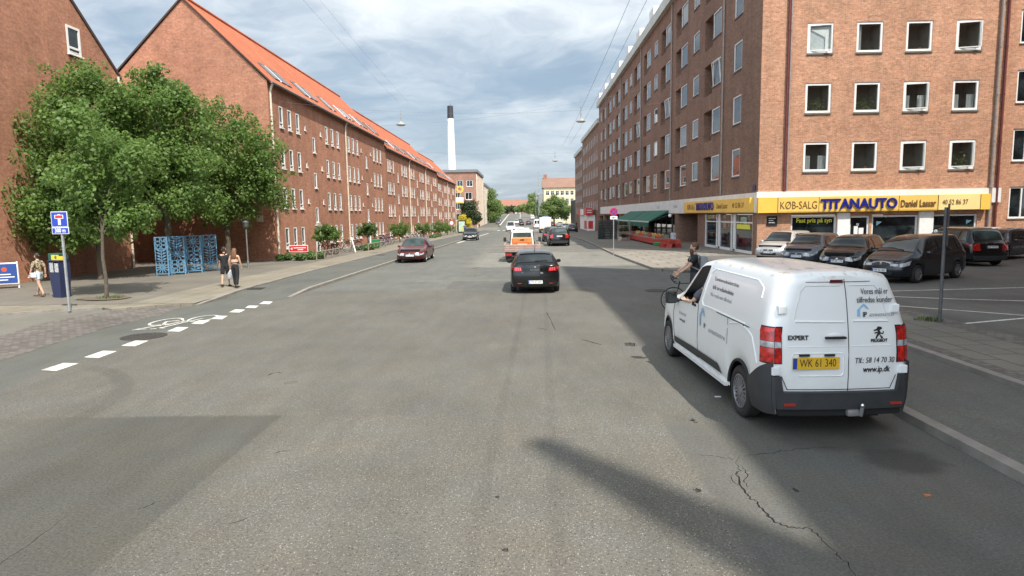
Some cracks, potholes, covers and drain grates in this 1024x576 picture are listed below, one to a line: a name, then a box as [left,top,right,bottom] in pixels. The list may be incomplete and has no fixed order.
crack [700,447,856,576]
